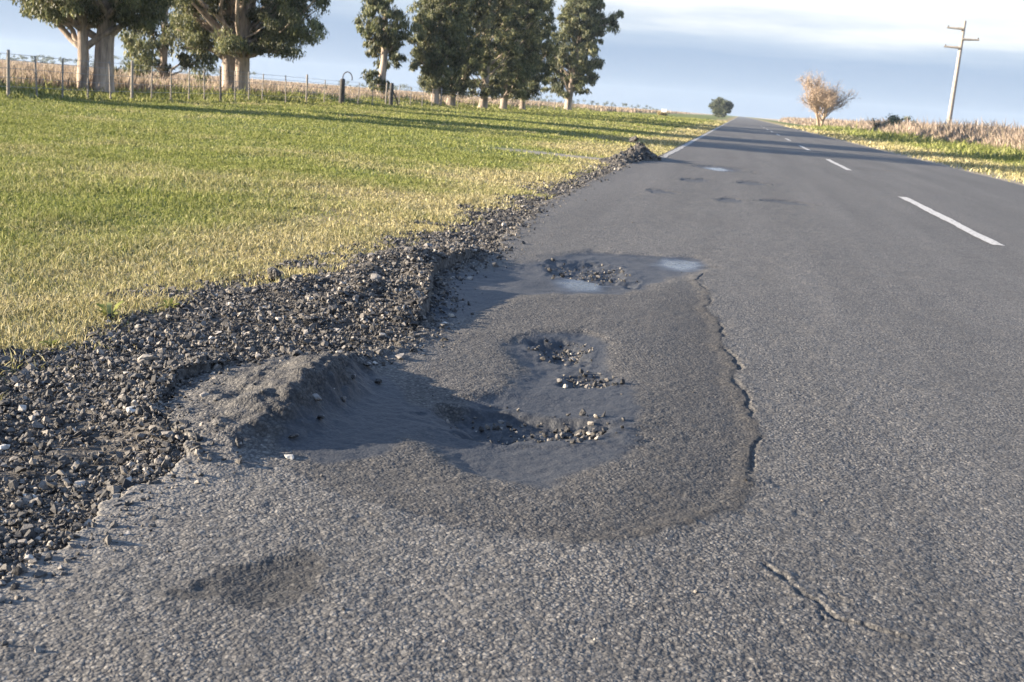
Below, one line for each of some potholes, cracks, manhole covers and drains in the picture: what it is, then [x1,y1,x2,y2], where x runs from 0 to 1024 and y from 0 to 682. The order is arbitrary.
pothole [553,371,620,389]
crack [565,273,922,642]
pothole [409,403,629,445]
pothole [523,337,594,368]
pothole [754,198,830,208]
pothole [538,259,642,289]
